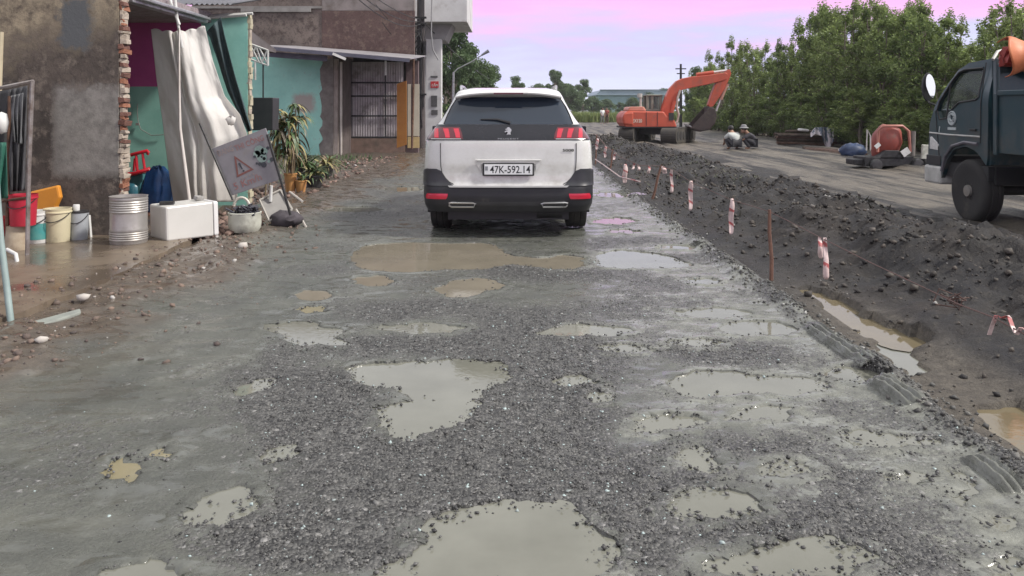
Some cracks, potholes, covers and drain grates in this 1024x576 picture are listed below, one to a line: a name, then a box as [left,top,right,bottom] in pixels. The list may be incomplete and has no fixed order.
pothole [349,489,646,576]
pothole [646,478,788,534]
pothole [283,287,343,303]
pothole [250,318,361,352]
pothole [341,240,600,274]
pothole [678,520,905,576]
pothole [424,276,515,300]
pothole [327,352,529,450]
pothole [580,248,702,270]
pothole [526,320,645,341]
pothole [587,216,644,226]
pothole [654,366,847,404]
